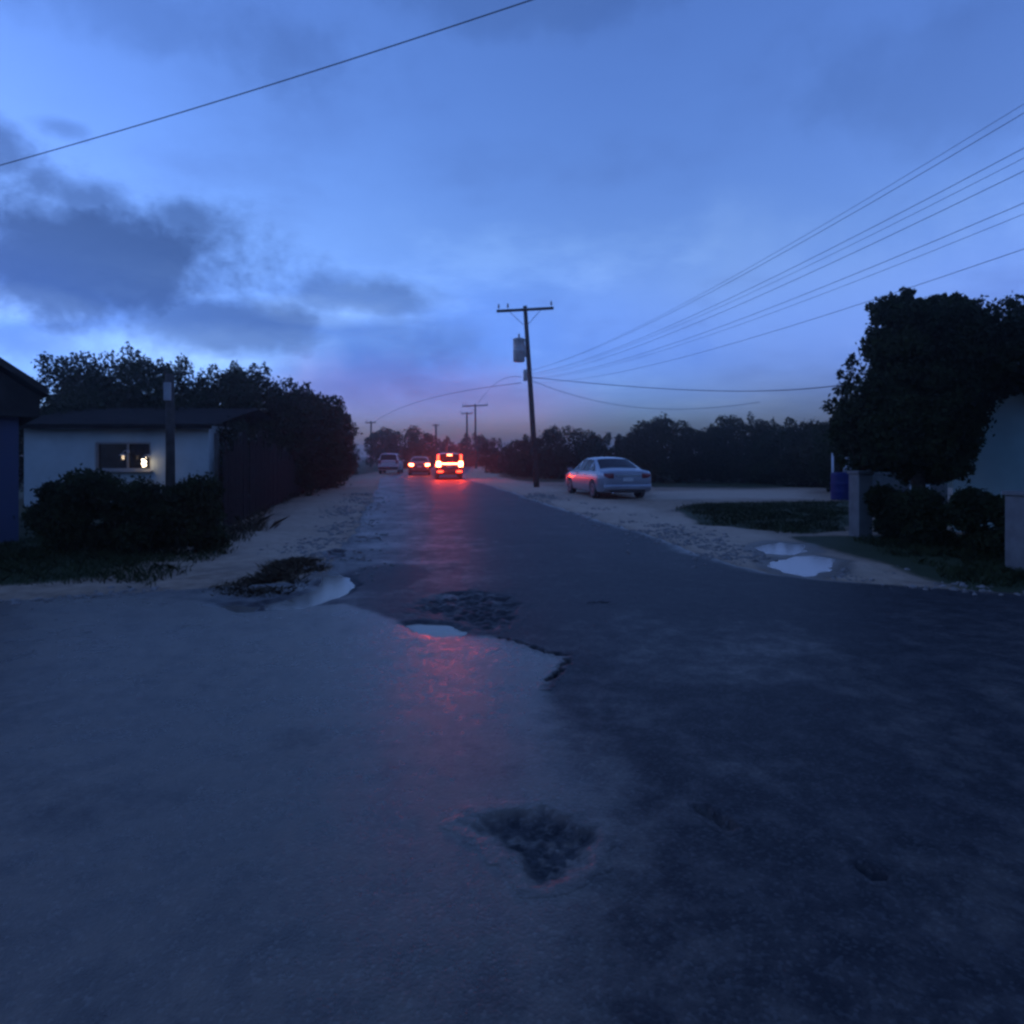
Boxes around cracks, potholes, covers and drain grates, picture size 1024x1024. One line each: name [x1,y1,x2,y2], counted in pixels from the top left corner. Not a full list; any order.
pothole [837,850,905,889]
pothole [681,801,751,837]
pothole [438,798,617,899]
